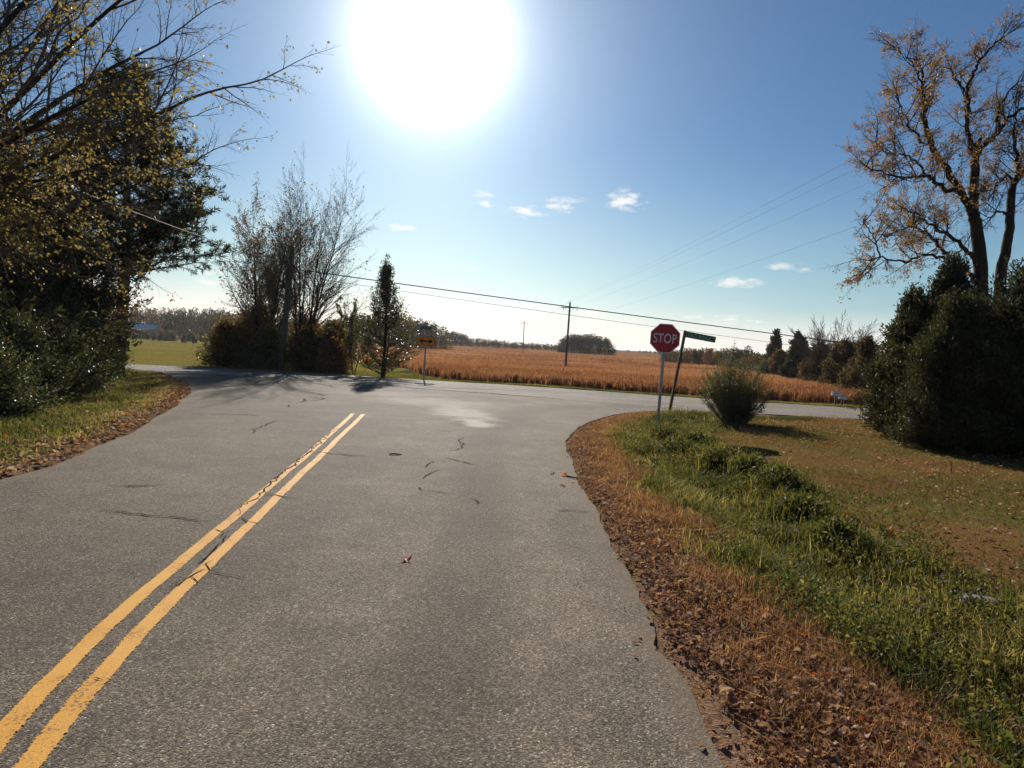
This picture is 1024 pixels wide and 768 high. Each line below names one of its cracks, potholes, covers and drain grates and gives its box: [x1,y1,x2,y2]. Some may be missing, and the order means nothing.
crack [419,429,478,493]
